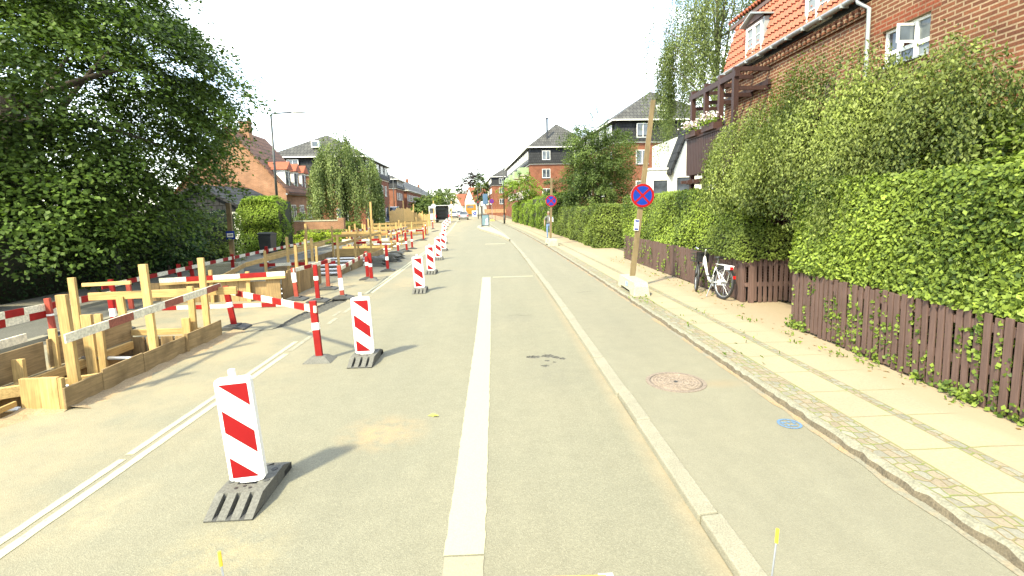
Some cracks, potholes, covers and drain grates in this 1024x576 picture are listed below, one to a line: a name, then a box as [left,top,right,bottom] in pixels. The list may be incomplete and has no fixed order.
manhole cover [646,372,707,393]
